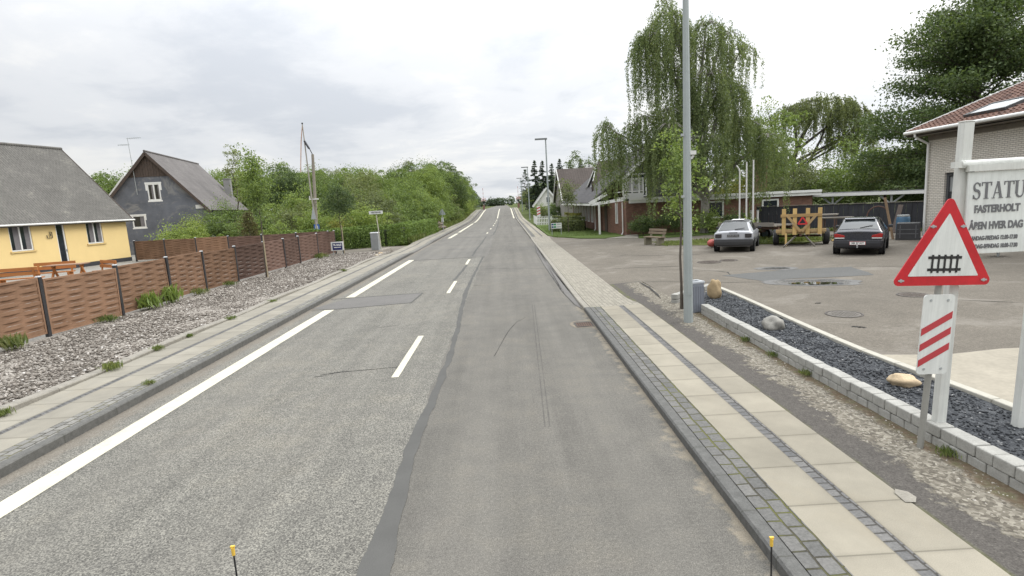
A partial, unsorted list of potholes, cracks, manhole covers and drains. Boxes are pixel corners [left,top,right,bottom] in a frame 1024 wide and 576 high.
manhole cover [825,310,864,318]
